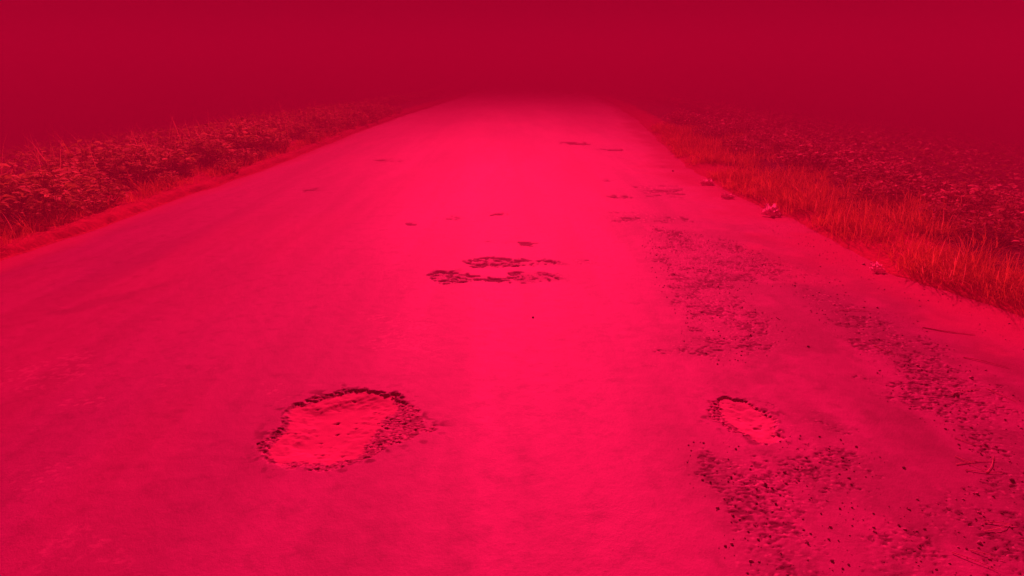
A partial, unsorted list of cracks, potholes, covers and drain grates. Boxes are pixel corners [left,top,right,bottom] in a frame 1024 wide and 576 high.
pothole [699,393,797,446]
pothole [251,387,444,473]
